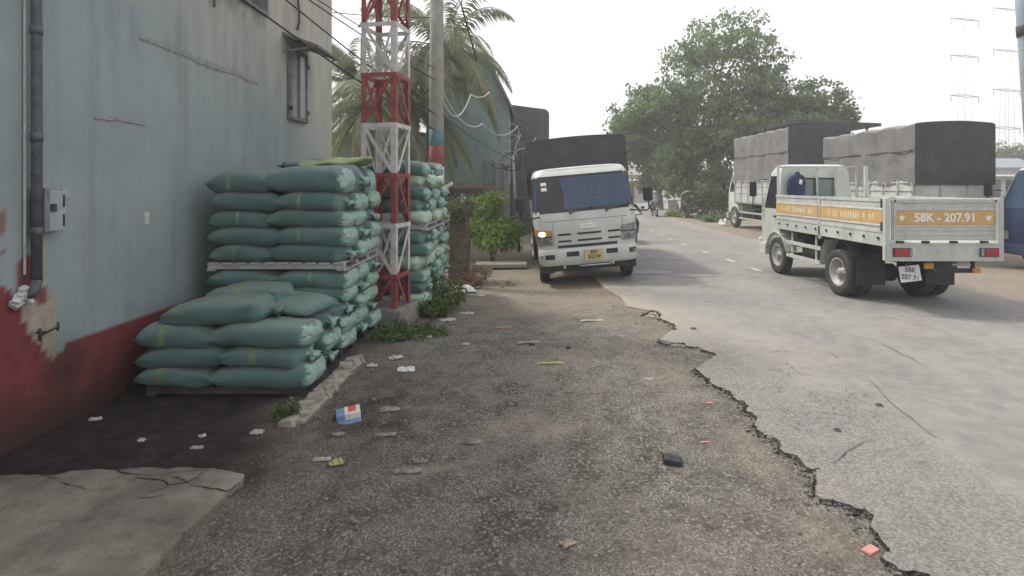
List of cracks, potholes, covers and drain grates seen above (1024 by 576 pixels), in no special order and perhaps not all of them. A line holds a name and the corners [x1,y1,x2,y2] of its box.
crack [114,469,240,498]
crack [640,310,941,576]
